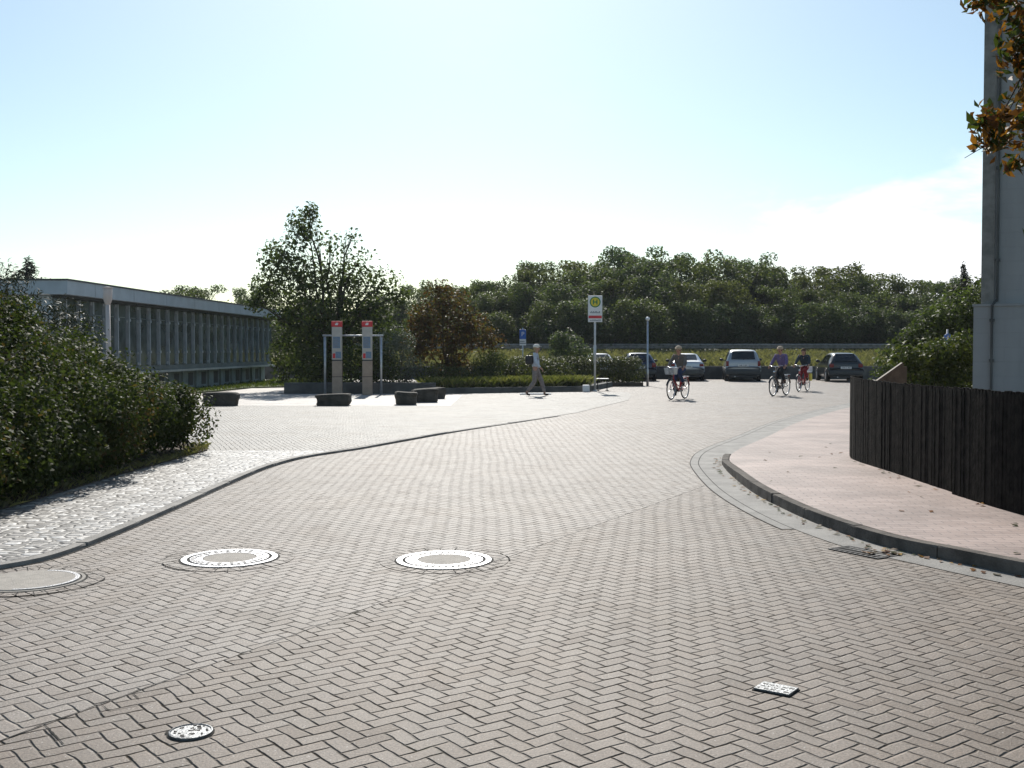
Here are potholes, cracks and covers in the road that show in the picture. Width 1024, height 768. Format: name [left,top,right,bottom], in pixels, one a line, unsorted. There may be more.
drain grate [828,545,899,559]
manhole cover [379,548,510,573]
utility cover [164,723,215,741]
utility cover [752,681,800,698]
manhole cover [0,566,108,597]
manhole cover [162,546,295,572]
